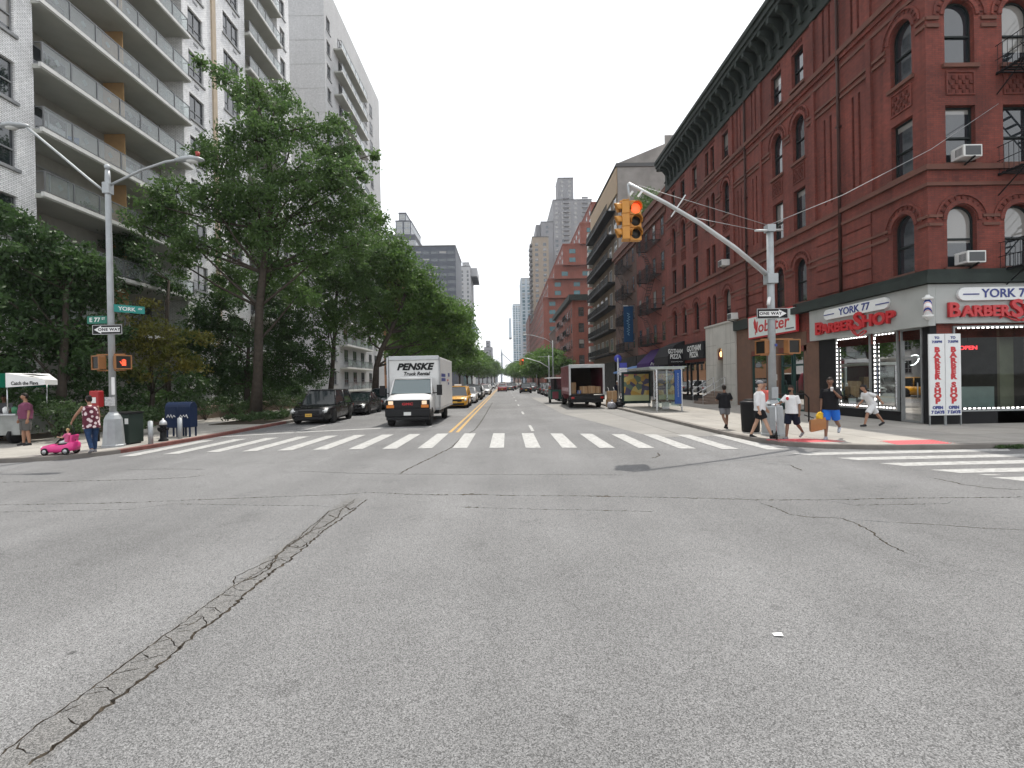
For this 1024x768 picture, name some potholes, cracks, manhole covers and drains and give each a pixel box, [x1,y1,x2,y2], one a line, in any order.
crack [764,504,1016,553]
crack [0,499,366,765]
crack [400,407,490,474]
